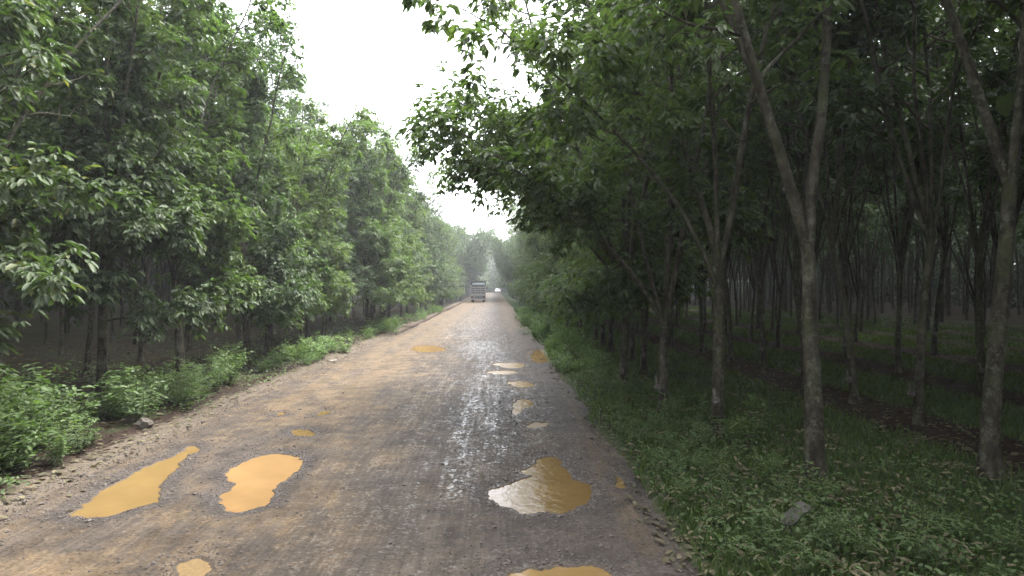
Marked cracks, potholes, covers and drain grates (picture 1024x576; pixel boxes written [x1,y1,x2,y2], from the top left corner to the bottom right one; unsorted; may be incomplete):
pothole [410,345,446,353]
pothole [505,563,613,576]
pothole [511,398,535,416]
pothole [217,453,305,513]
pothole [529,349,550,364]
pothole [171,555,216,576]
pothole [290,428,317,436]
pothole [486,456,594,514]
pothole [66,445,201,518]
pothole [612,474,628,489]
